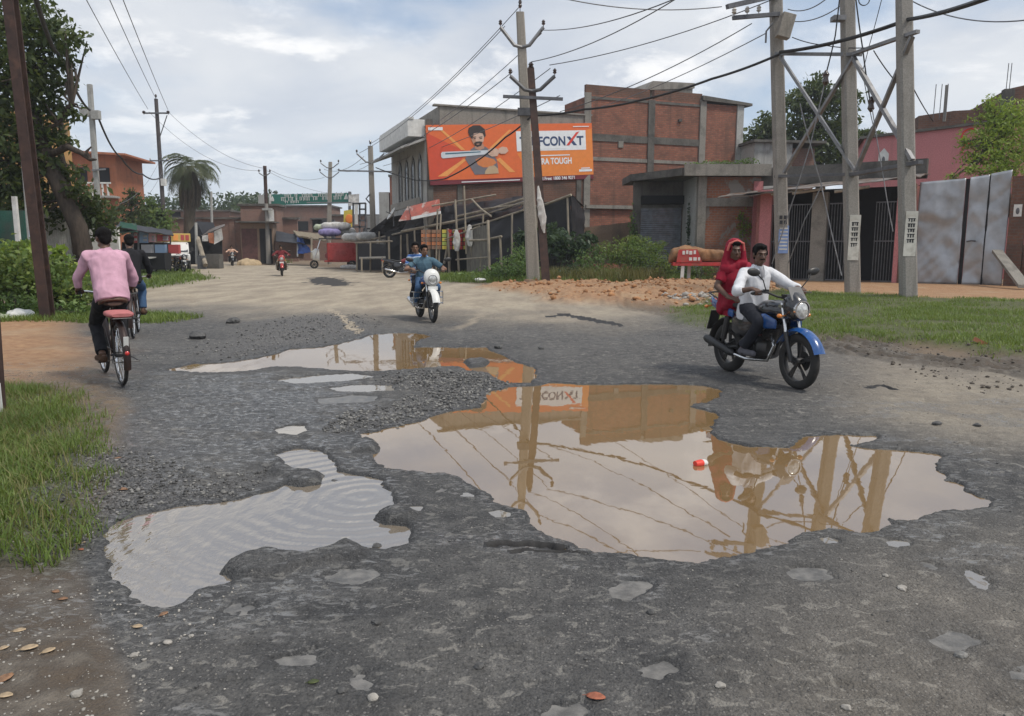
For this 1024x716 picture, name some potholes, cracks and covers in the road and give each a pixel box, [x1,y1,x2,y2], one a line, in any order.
pothole [264,422,317,436]
crack [483,540,588,555]
pothole [351,378,1006,566]
crack [545,313,623,327]
pothole [90,444,431,612]
pothole [158,331,545,385]
